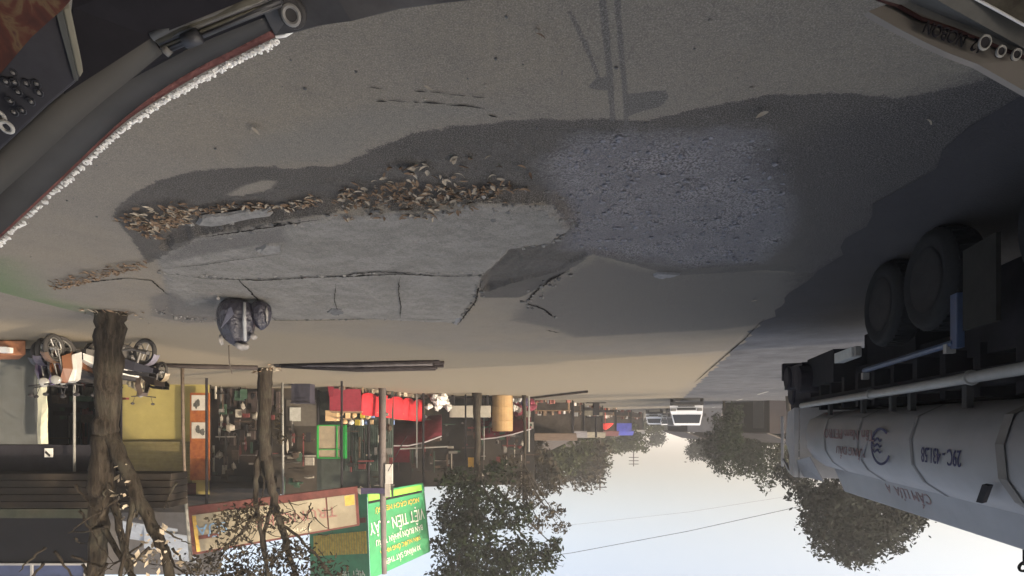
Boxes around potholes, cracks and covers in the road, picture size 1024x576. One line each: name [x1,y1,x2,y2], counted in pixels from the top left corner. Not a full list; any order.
crack [371,87,498,118]
crack [459,280,483,323]
pothole [150,124,803,292]
crack [527,271,569,333]
crack [60,254,277,294]
crack [239,280,359,321]
